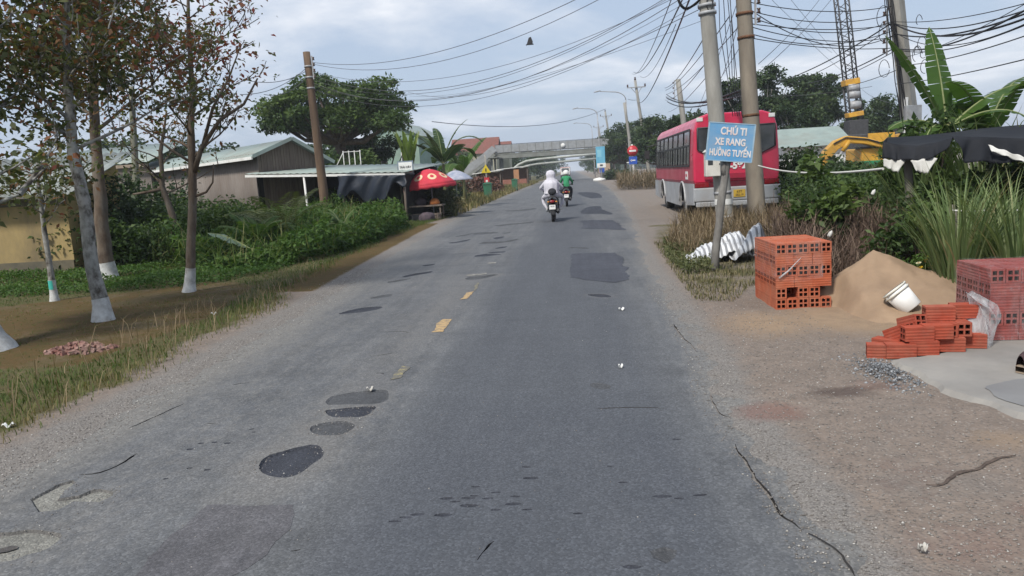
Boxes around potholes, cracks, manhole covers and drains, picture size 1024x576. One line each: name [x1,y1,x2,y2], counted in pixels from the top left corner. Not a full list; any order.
crack [79,454,136,475]
crack [926,455,1016,486]
pothole [0,529,62,562]
pothole [30,480,113,512]
crack [735,444,855,576]
